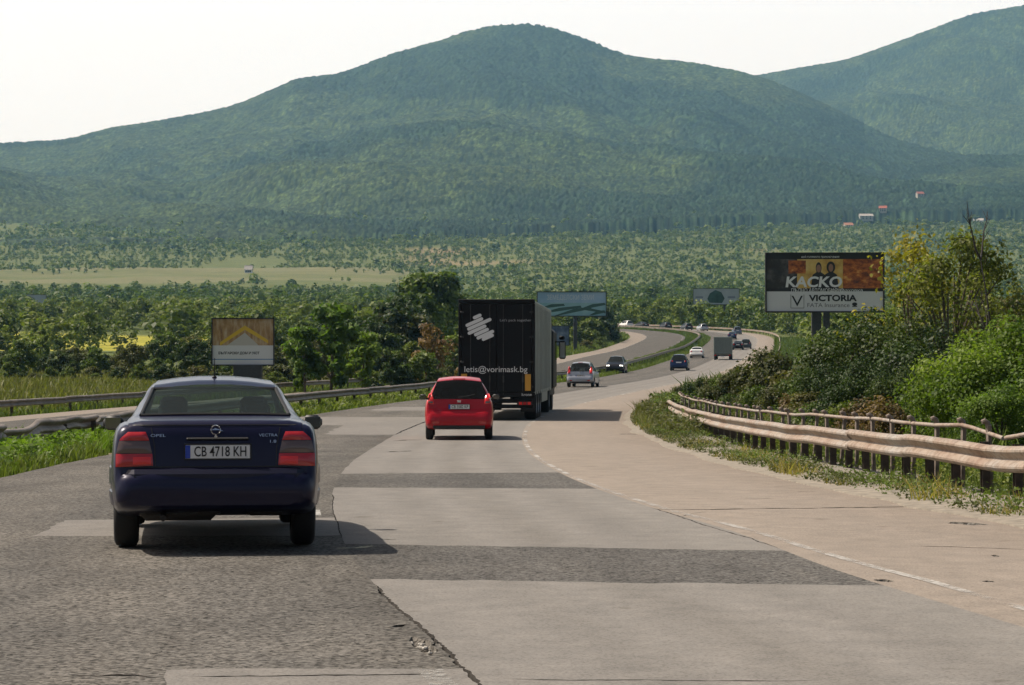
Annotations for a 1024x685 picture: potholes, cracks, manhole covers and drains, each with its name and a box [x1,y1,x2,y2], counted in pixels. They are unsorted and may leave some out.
pothole [409,637,438,655]
